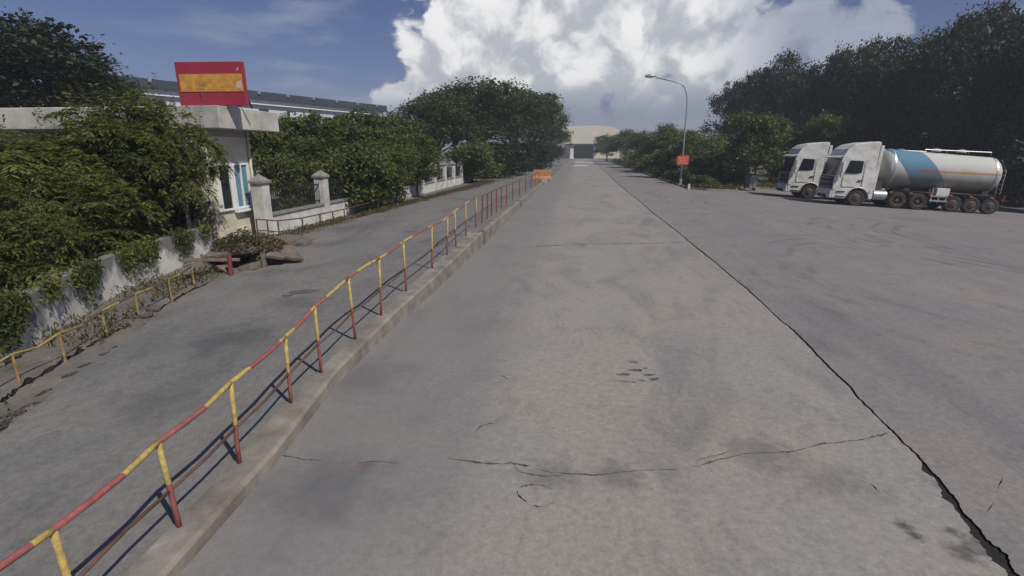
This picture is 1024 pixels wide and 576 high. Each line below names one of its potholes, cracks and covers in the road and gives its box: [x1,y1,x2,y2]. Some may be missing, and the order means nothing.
pothole [614,360,659,383]
crack [283,177,1020,576]
